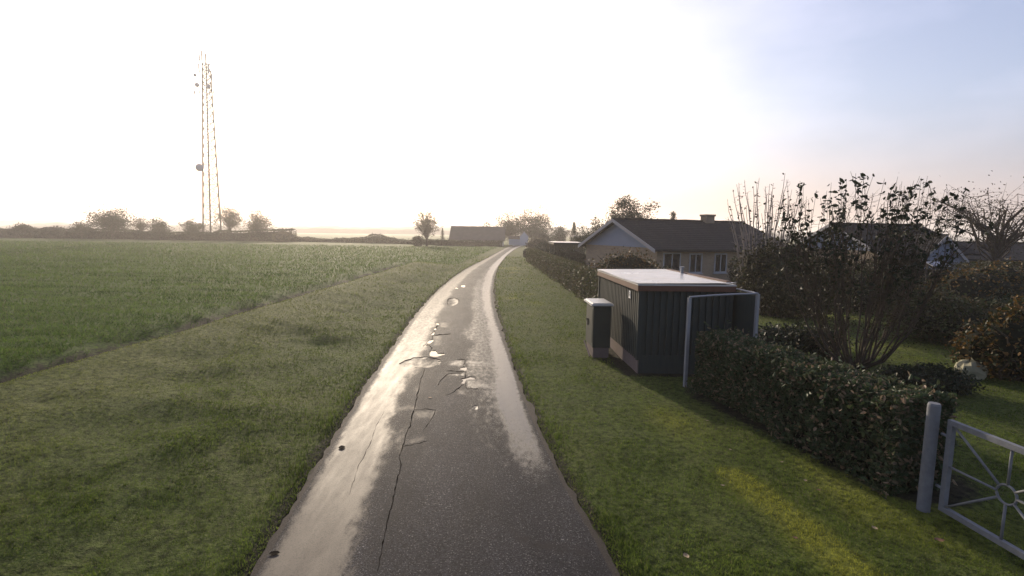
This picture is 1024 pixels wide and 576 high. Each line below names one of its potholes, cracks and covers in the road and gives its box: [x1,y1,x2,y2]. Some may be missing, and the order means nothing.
pothole [399,357,441,368]
